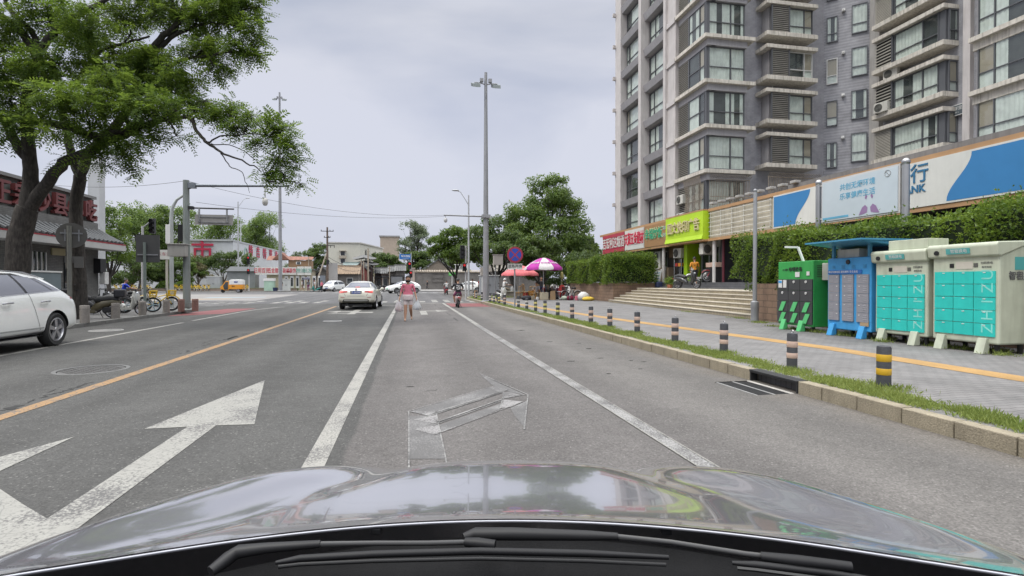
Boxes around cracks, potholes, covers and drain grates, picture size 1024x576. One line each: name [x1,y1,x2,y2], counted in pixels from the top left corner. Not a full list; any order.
drain grate [716,369,808,395]
manhole cover [51,364,131,375]
